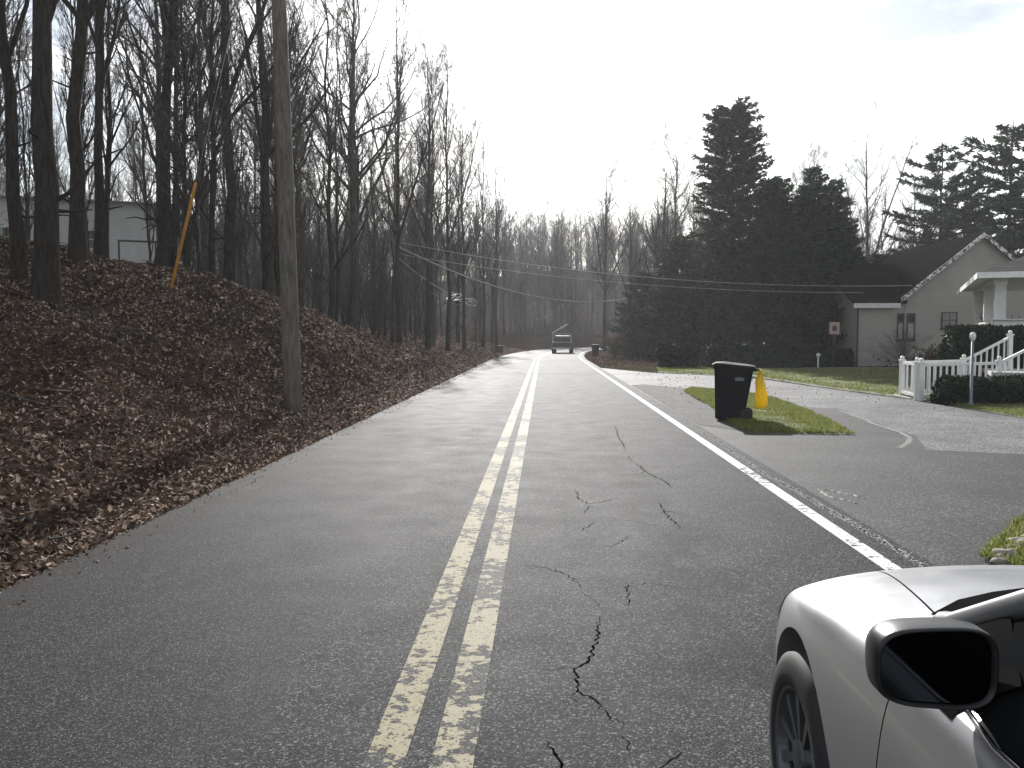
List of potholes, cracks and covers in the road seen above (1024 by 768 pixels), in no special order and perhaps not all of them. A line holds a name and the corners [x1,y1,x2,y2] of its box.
crack [521,565,631,752]
crack [576,490,615,532]
crack [605,503,684,547]
crack [615,428,669,485]
crack [547,741,564,768]
